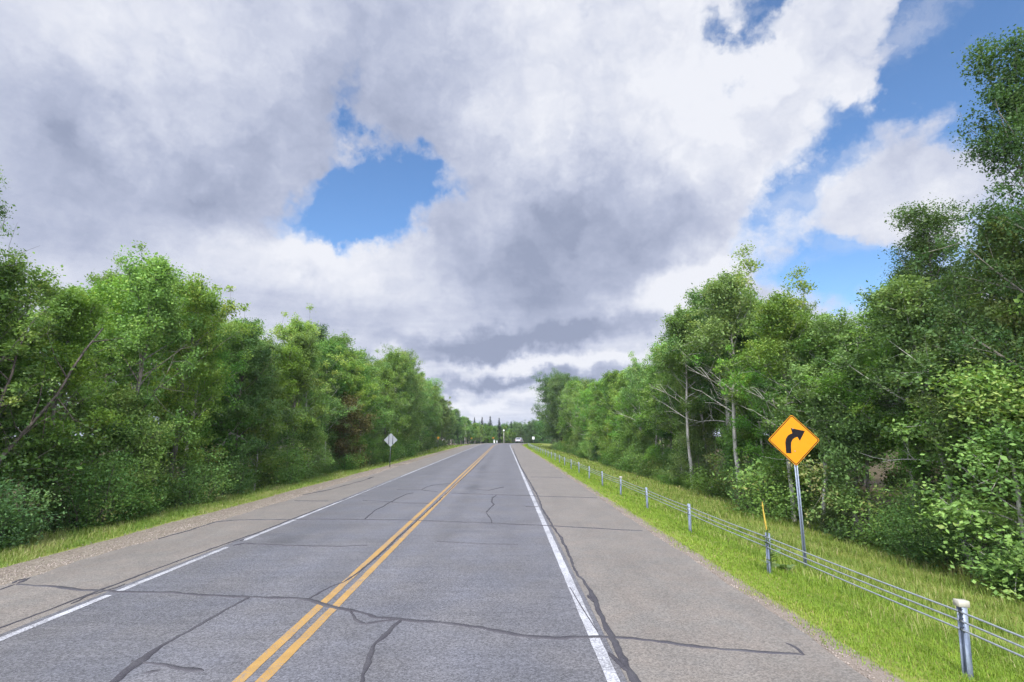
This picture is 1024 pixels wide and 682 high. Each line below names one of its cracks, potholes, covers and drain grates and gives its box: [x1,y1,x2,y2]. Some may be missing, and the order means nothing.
crack [158,456,643,582]
